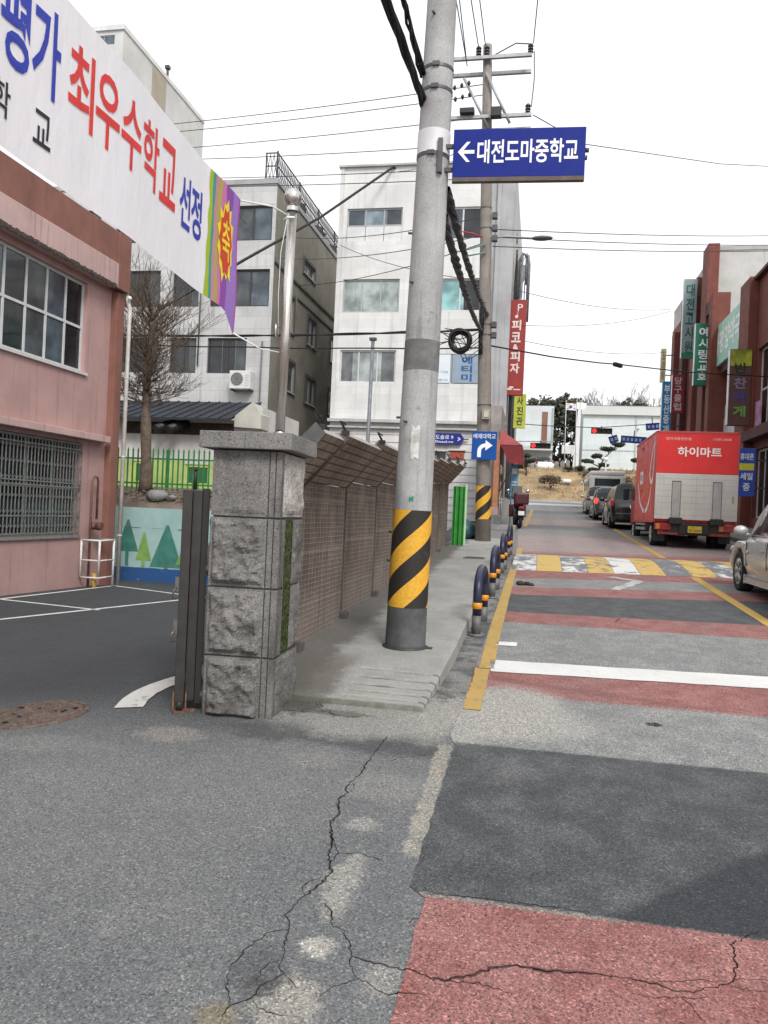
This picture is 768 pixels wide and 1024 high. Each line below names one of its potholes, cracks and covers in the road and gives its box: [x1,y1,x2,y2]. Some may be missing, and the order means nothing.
manhole cover [0,700,90,729]
crack [221,736,766,1022]
